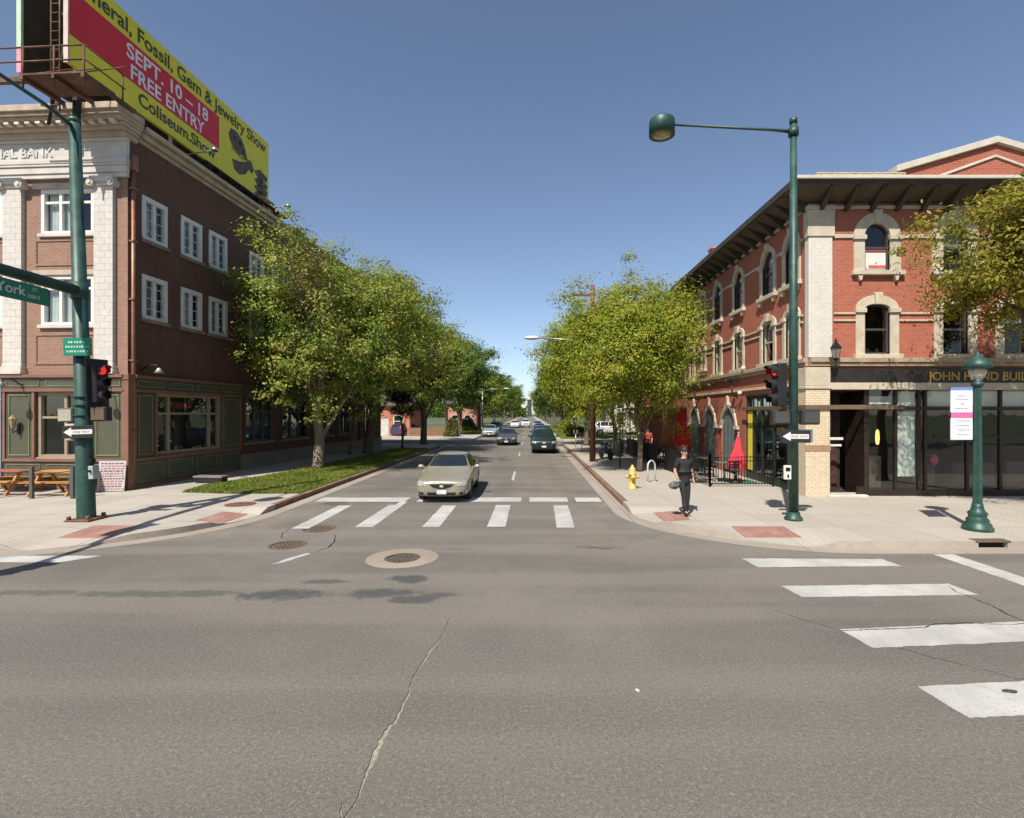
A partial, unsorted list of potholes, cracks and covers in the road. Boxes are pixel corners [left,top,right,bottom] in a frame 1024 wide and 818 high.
manhole cover [267,540,308,550]
crack [339,618,449,818]
manhole cover [301,525,336,533]
manhole cover [365,549,438,569]
crack [897,647,1023,680]
drain grate [968,538,1011,547]
